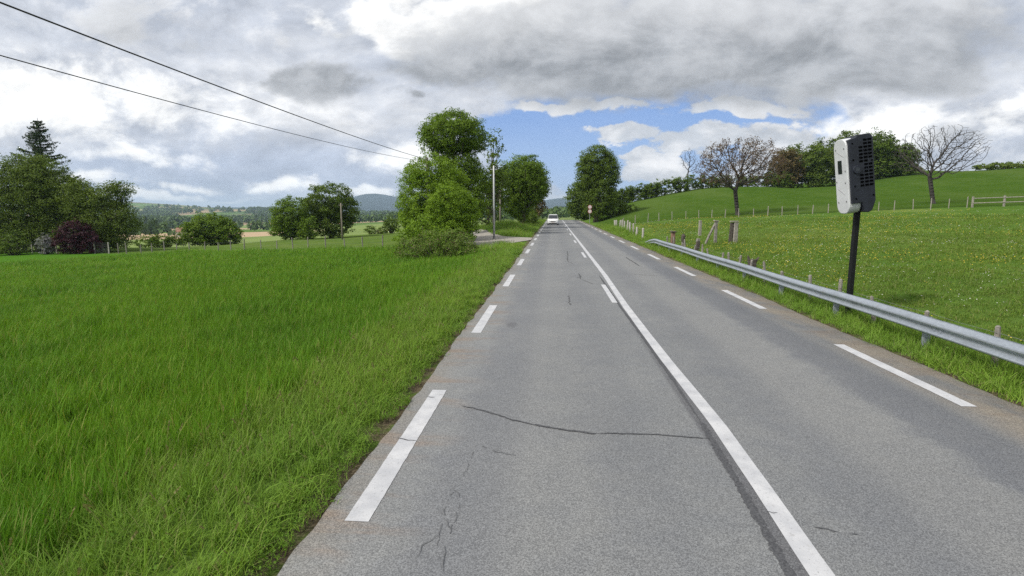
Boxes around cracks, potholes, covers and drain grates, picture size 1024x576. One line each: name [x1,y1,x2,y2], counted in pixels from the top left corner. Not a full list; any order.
crack [413,451,474,566]
crack [465,406,701,438]
